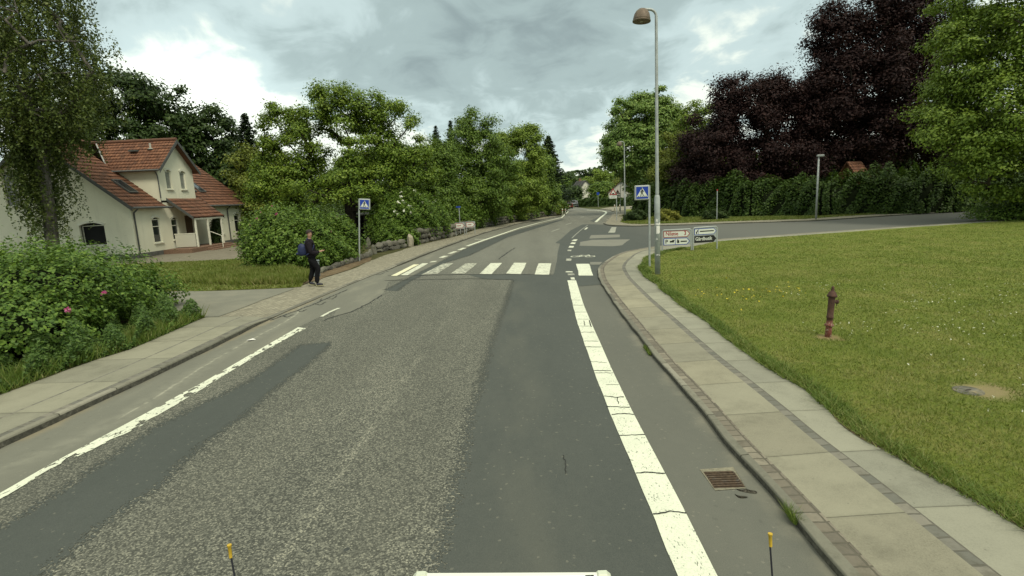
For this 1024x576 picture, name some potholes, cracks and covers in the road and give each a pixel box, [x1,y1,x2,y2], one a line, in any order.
drain grate [700,467,746,491]
